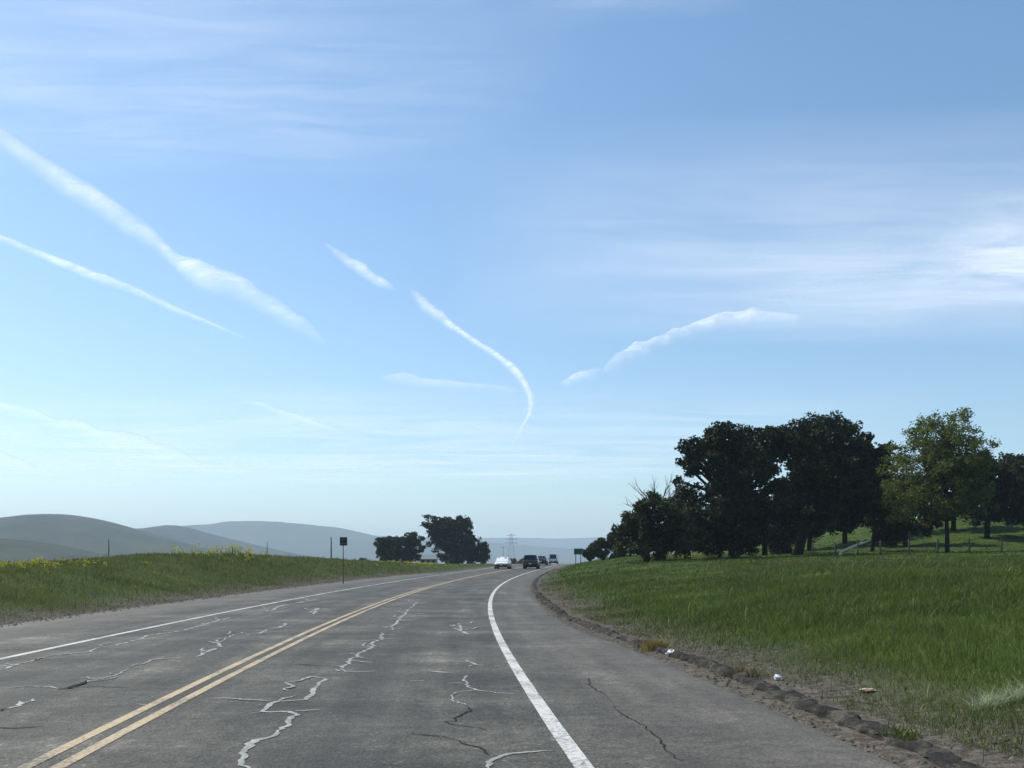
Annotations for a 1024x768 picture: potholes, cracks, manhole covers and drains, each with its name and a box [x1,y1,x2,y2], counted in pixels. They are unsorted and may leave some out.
crack [410,660,555,768]
crack [588,678,683,761]
crack [232,600,423,768]
crack [450,621,480,634]
crack [0,599,328,710]
